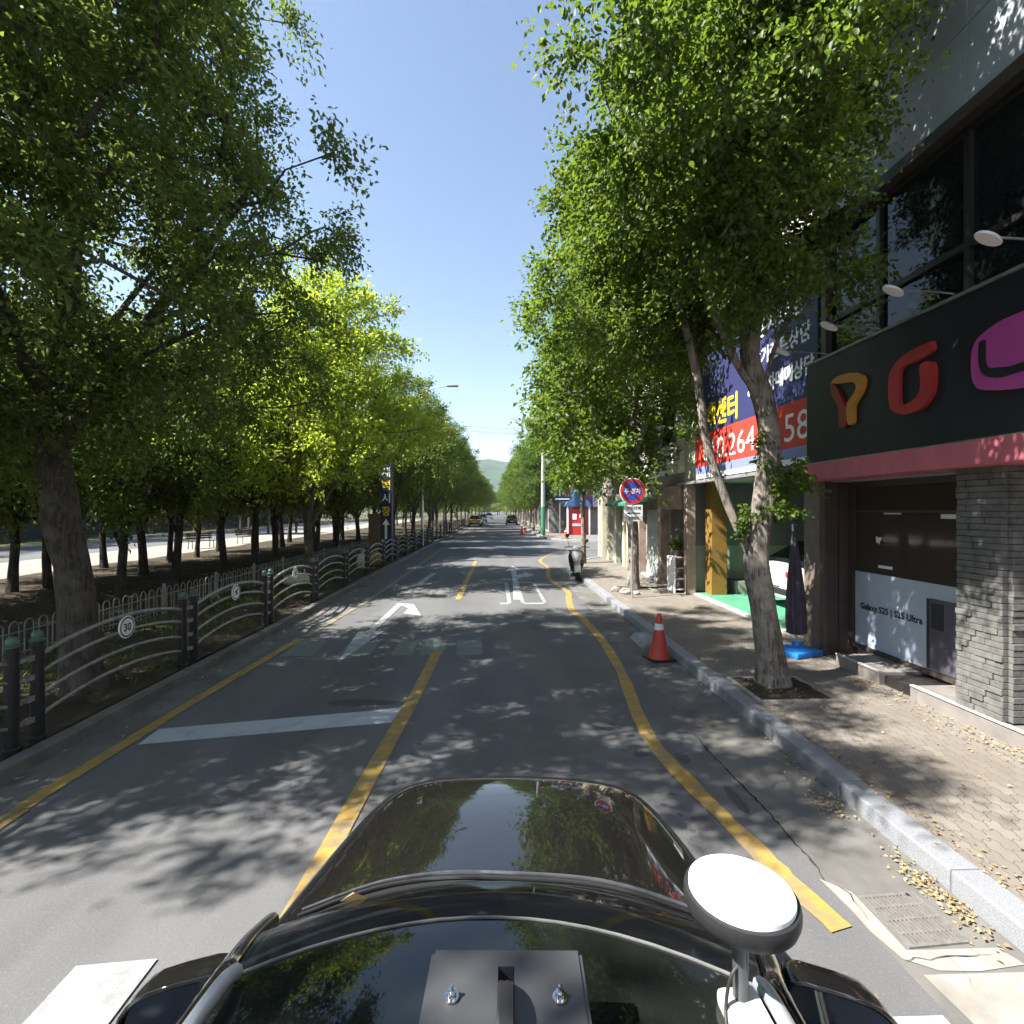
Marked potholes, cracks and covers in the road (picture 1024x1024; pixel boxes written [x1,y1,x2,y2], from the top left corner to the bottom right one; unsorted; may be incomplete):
drain grate [856,891,972,949]
